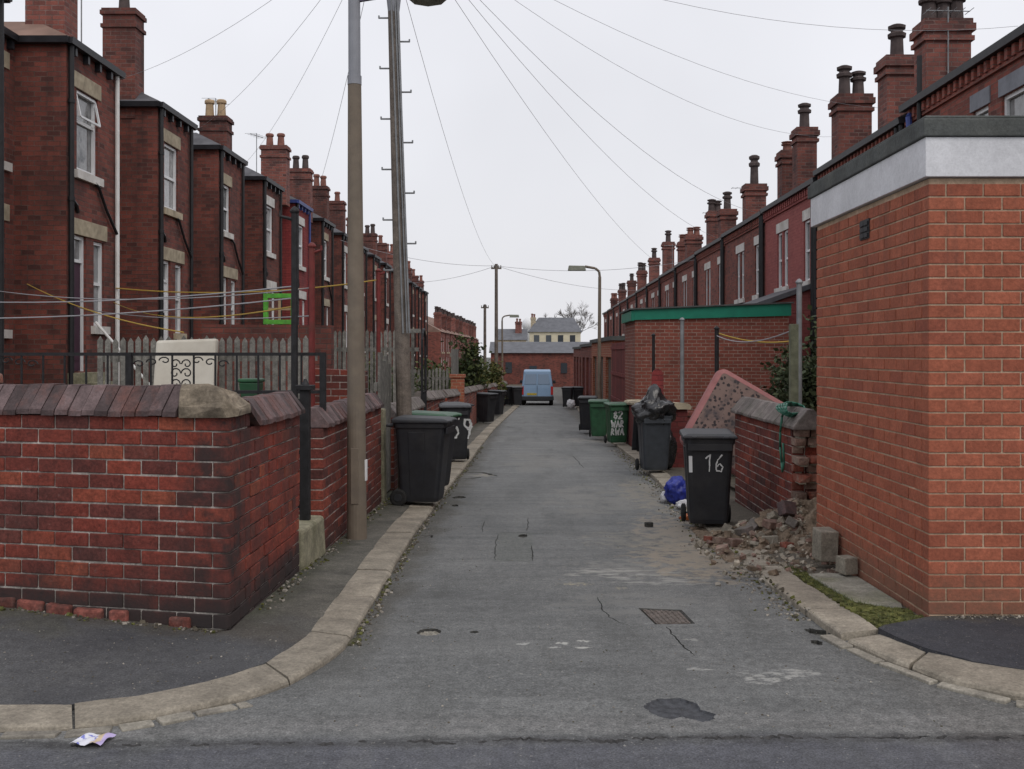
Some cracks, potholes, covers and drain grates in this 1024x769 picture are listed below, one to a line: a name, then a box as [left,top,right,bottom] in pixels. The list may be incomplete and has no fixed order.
crack [482,520,534,560]
pothole [417,628,441,636]
